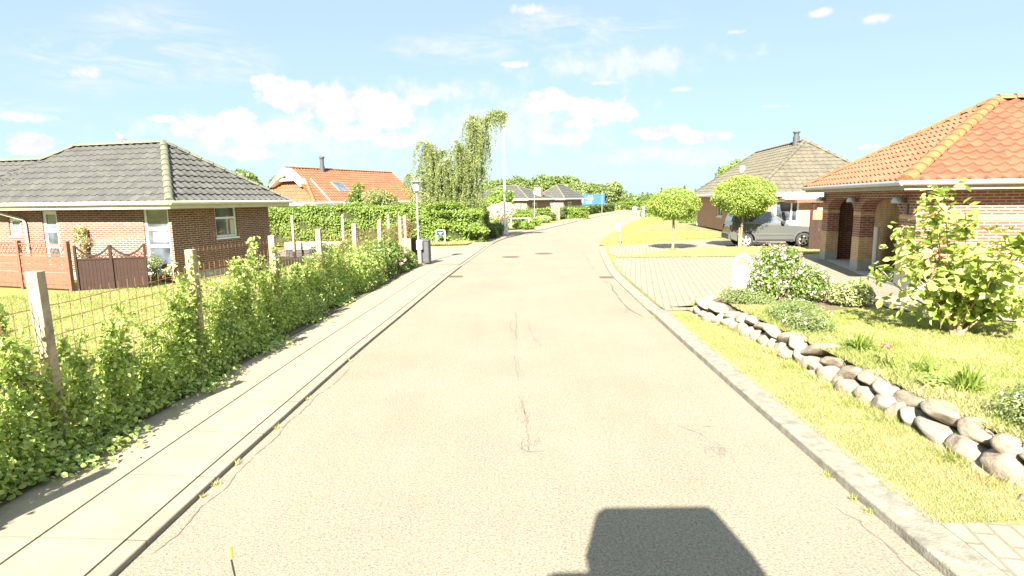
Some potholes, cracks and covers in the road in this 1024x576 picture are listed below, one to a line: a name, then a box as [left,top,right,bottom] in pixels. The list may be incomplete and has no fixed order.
crack [509,312,541,377]
crack [514,396,541,452]
crack [833,504,919,575]
